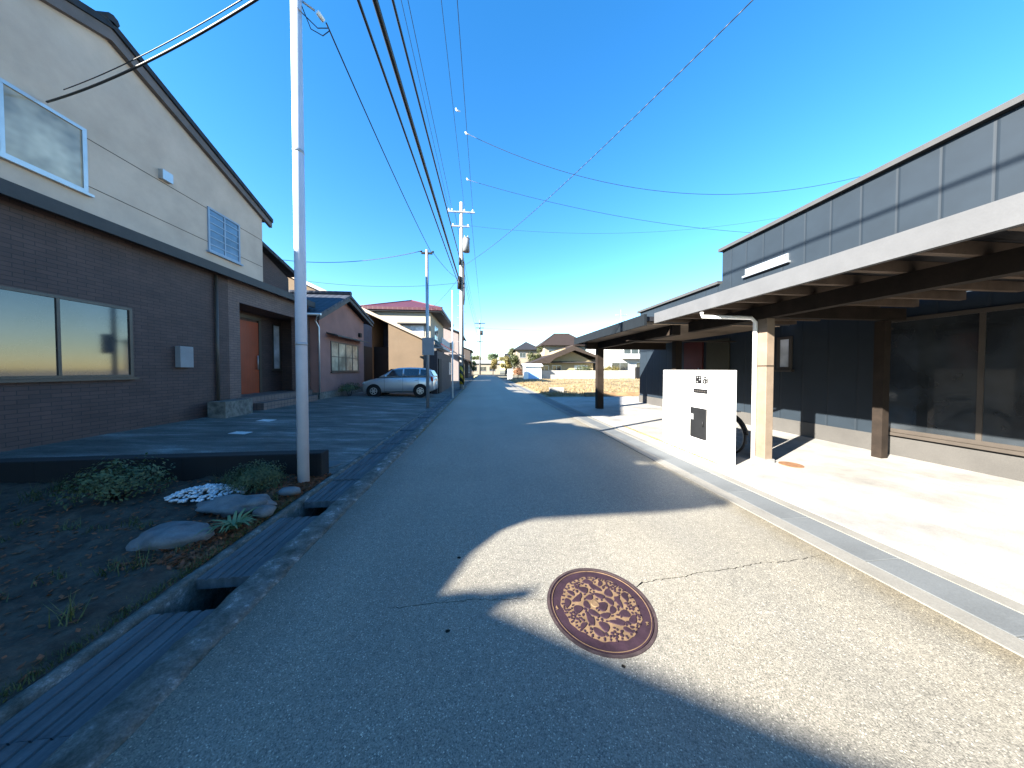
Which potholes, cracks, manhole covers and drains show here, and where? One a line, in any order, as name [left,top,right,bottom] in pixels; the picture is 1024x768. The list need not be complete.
crack [637,554,826,587]
crack [389,598,543,608]
manhole cover [547,568,658,659]
